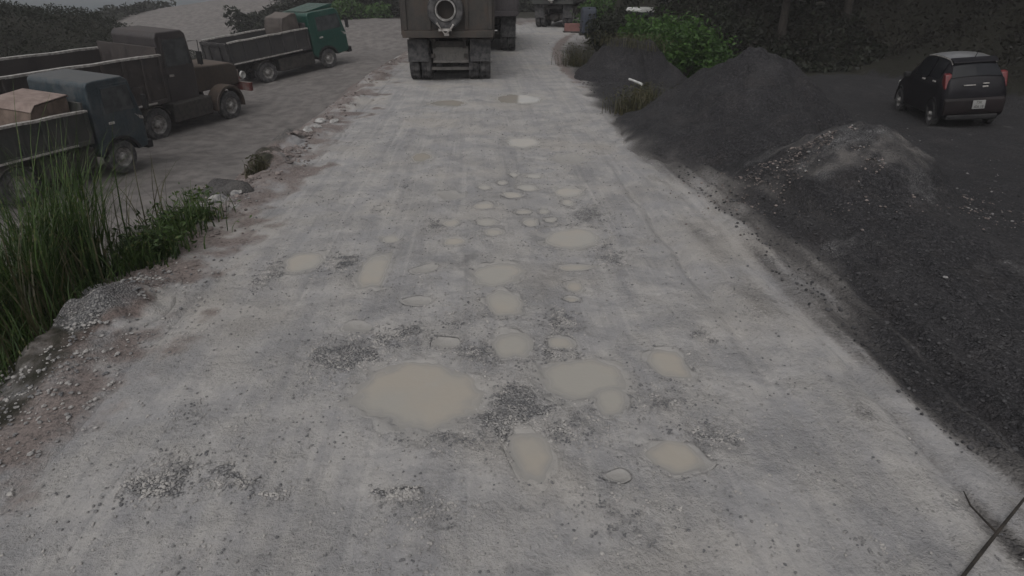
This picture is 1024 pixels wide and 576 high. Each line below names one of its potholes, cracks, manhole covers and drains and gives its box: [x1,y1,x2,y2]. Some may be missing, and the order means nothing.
pothole [349,249,396,293]
pothole [642,345,699,382]
pothole [599,466,633,483]
pothole [431,334,461,350]
pothole [639,433,717,479]
pothole [464,259,529,289]
pothole [487,92,550,105]
pothole [400,295,435,306]
pothole [278,248,333,274]
pothole [591,389,631,419]
pothole [487,328,539,362]
pothole [500,136,547,149]
